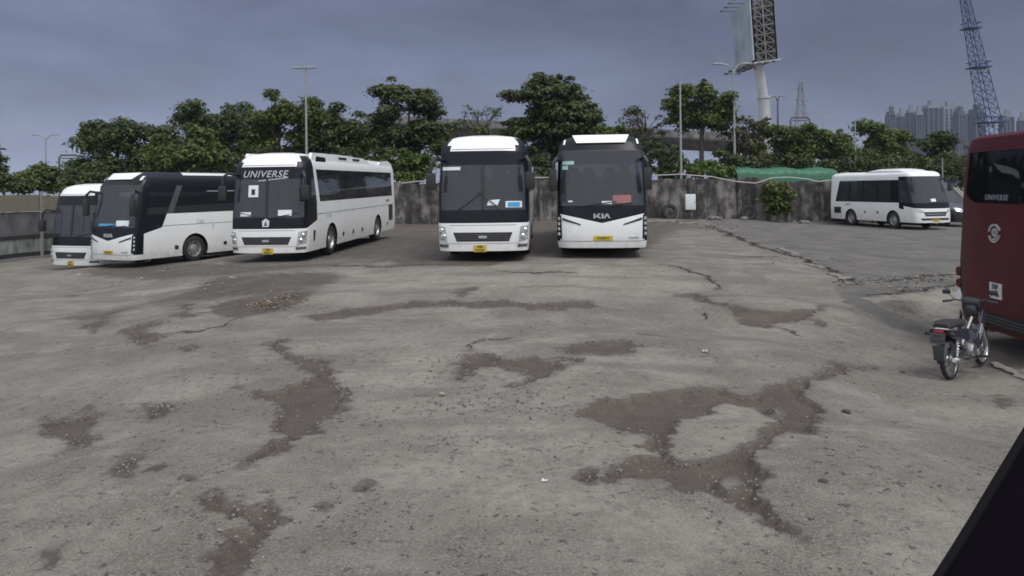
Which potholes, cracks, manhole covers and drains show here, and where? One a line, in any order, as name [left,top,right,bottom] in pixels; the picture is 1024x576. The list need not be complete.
pothole [142,402,172,419]
crack [669,265,721,290]
pothole [454,353,566,388]
pothole [240,339,350,470]
pothole [676,294,824,328]
pothole [307,300,597,320]
pothole [39,407,103,450]
pothole [198,488,292,576]
pothole [577,361,878,544]
pothole [561,339,639,356]
pothole [111,455,146,478]
crack [706,226,845,276]
